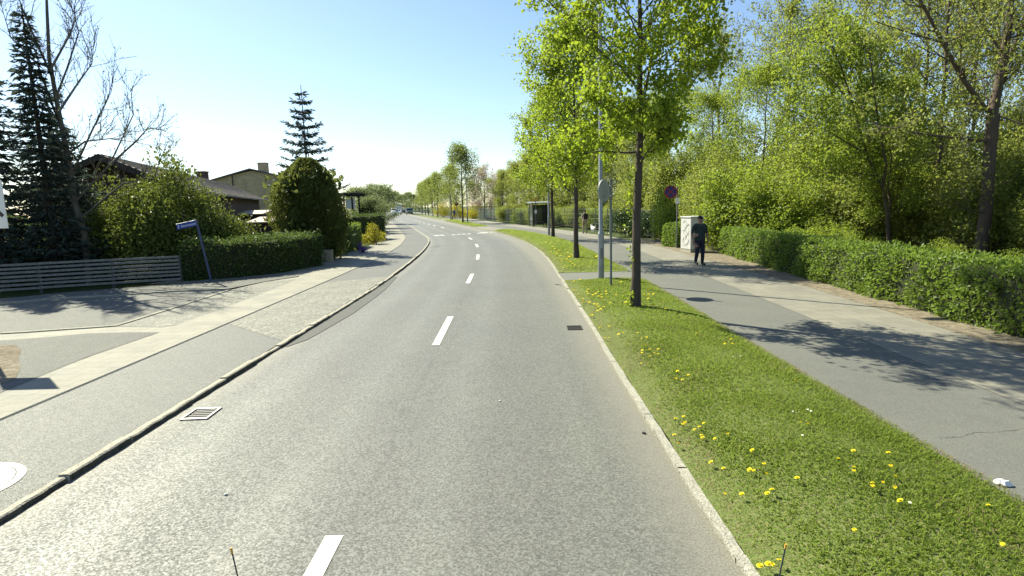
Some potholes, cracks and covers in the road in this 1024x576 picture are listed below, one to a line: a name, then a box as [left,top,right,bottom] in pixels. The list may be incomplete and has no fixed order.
manhole cover [0,463,26,490]
drain grate [179,407,222,421]
